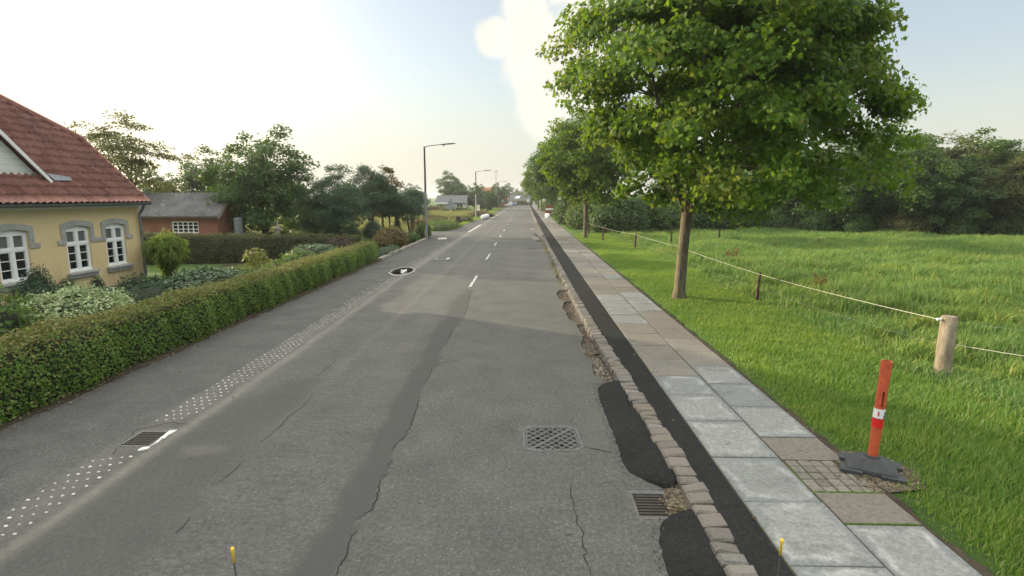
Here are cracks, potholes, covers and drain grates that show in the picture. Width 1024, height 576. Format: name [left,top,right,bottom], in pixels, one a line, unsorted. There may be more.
drain grate [105,428,182,451]
pothole [582,352,616,384]
pothole [560,301,584,323]
manhole cover [517,424,591,455]
drain grate [619,486,670,525]
pothole [554,289,571,300]
pothole [574,323,600,354]
crack [567,485,591,575]
crack [176,357,337,532]
crack [336,294,471,575]
